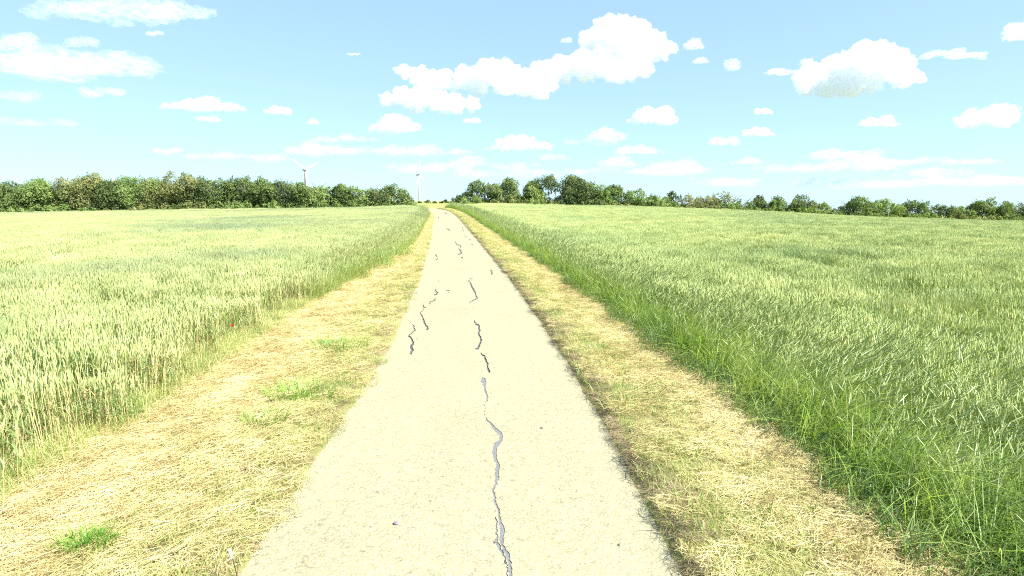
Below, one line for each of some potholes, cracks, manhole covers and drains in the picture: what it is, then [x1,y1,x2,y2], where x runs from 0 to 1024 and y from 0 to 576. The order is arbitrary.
crack [408,289,450,354]
crack [474,320,513,576]
